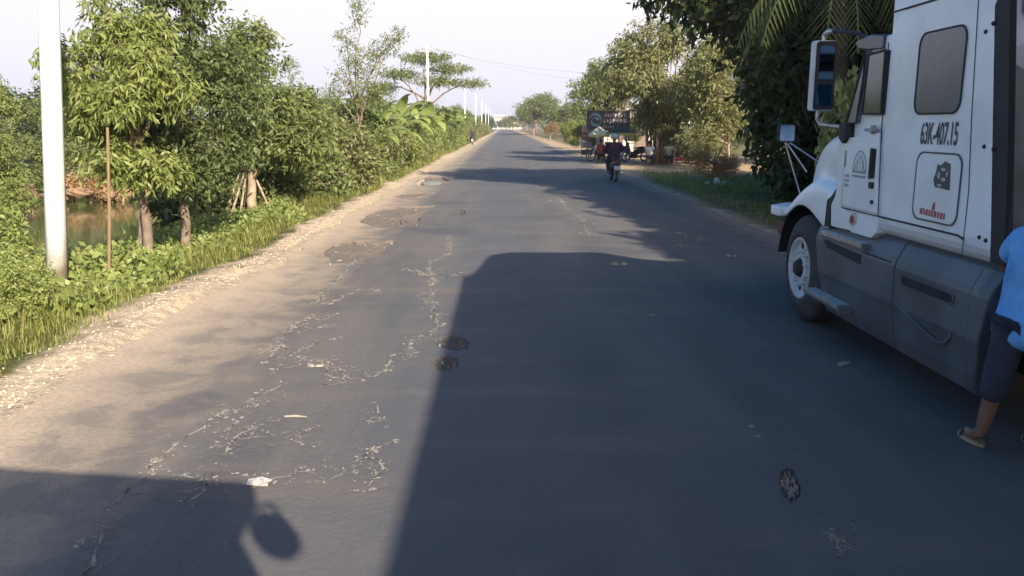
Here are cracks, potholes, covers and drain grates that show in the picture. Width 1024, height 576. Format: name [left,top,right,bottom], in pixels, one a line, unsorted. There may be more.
pothole [779,468,801,503]
crack [818,517,858,556]
pothole [429,356,458,371]
pothole [432,336,470,351]
crack [546,183,602,236]
crack [68,236,461,576]
